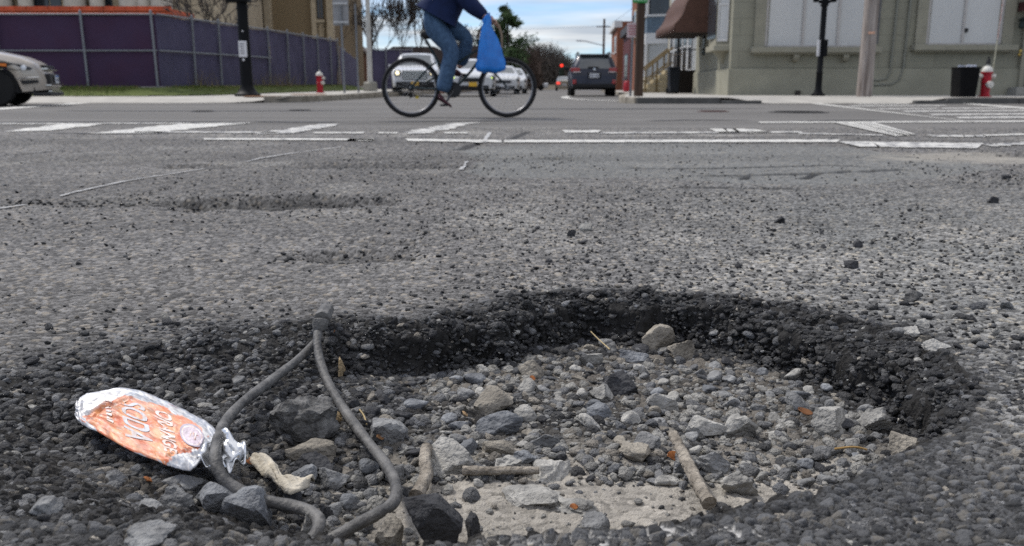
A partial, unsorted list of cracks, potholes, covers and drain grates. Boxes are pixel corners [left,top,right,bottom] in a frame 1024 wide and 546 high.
pothole [0,286,993,546]
pothole [164,193,405,213]
